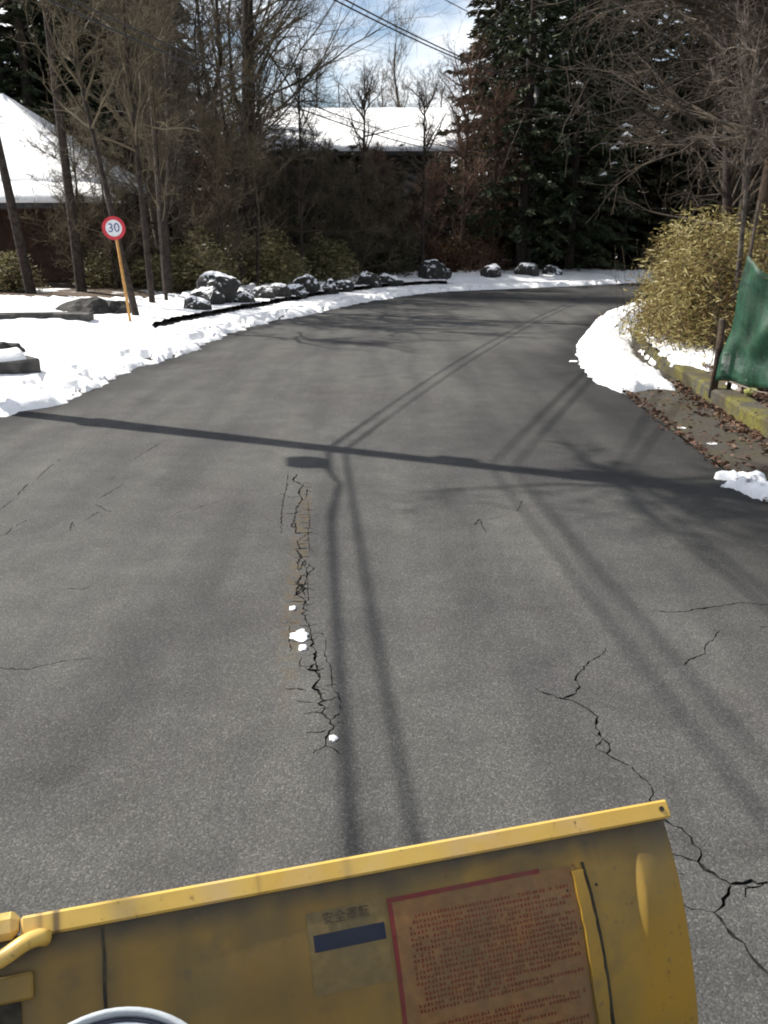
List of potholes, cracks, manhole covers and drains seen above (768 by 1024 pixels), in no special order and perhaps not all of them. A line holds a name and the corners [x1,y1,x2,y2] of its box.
crack [536,650,768,974]
crack [69,443,160,530]
crack [660,602,767,612]
crack [685,630,719,665]
